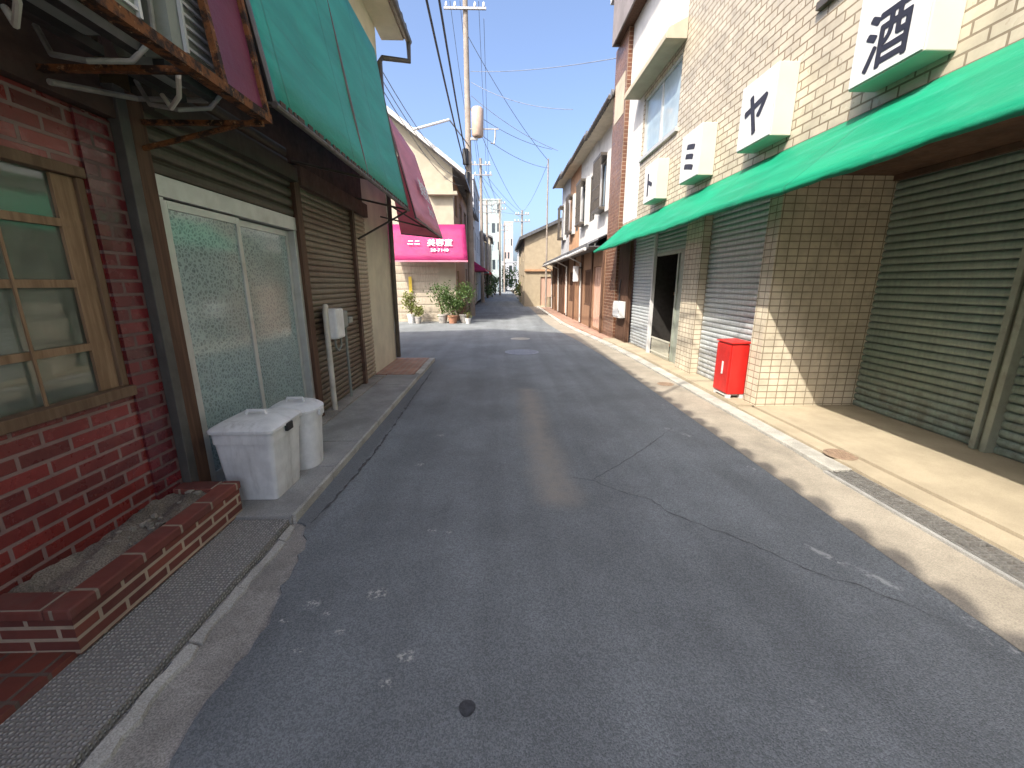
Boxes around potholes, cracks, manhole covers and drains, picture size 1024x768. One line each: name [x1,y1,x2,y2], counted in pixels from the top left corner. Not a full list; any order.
manhole cover [823,448,859,460]
crack [580,429,945,620]
